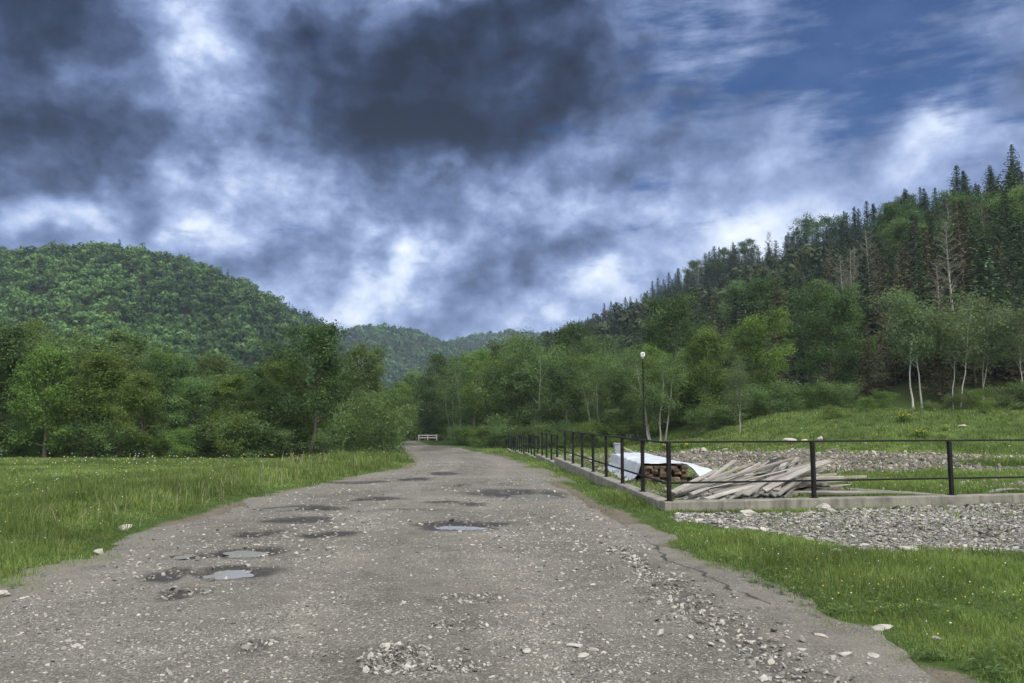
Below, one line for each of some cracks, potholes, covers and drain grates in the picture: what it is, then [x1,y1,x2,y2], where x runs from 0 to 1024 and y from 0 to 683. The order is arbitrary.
crack [646,541,771,604]
pothole [144,584,233,607]
pothole [288,530,368,541]
pothole [179,563,301,584]
pothole [200,545,307,561]
pothole [254,503,364,513]
pothole [396,518,533,534]
pothole [240,515,347,526]
pothole [435,487,578,499]
pothole [219,528,307,540]
